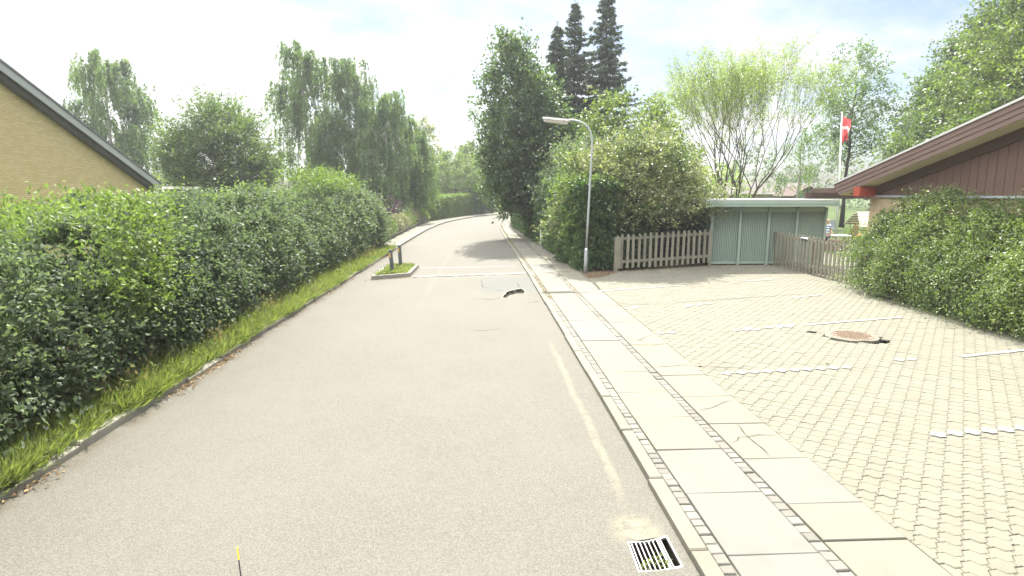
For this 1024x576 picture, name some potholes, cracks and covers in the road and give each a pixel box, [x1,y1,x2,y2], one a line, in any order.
pothole [501,288,526,298]
manhole cover [820,330,890,344]
drain grate [627,536,683,573]
